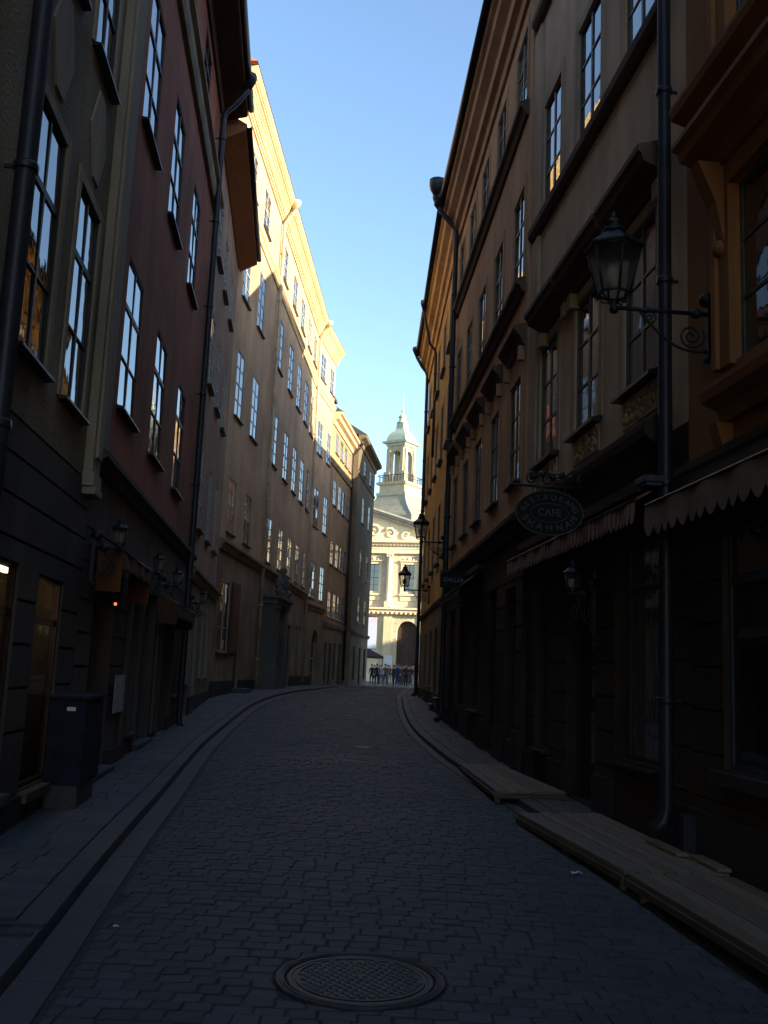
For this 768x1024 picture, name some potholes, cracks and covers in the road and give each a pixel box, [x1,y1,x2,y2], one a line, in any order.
manhole cover [274,952,446,1012]
